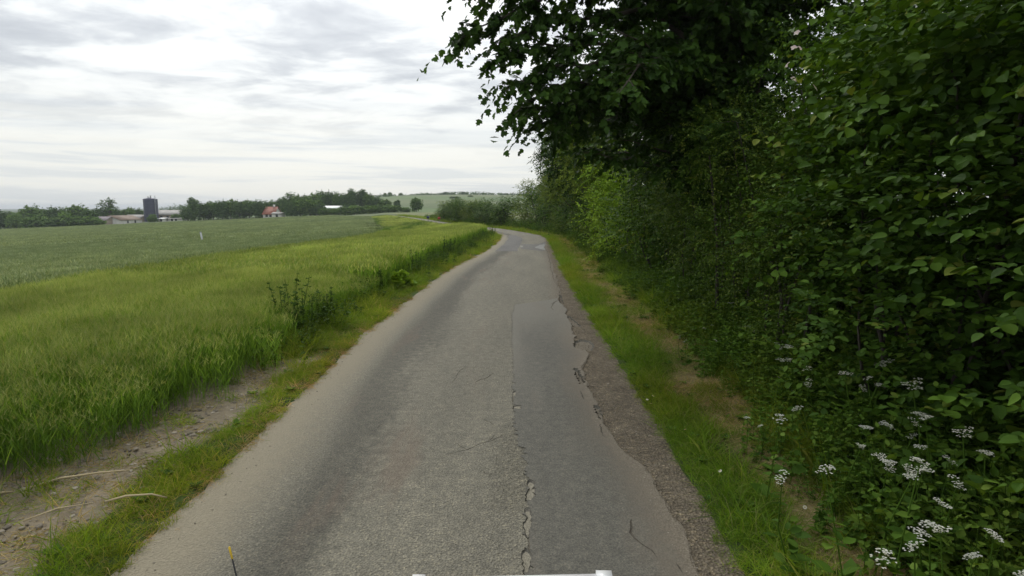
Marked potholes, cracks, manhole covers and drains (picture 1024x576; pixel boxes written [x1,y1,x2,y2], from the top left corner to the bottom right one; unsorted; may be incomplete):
crack [629,519,657,557]
